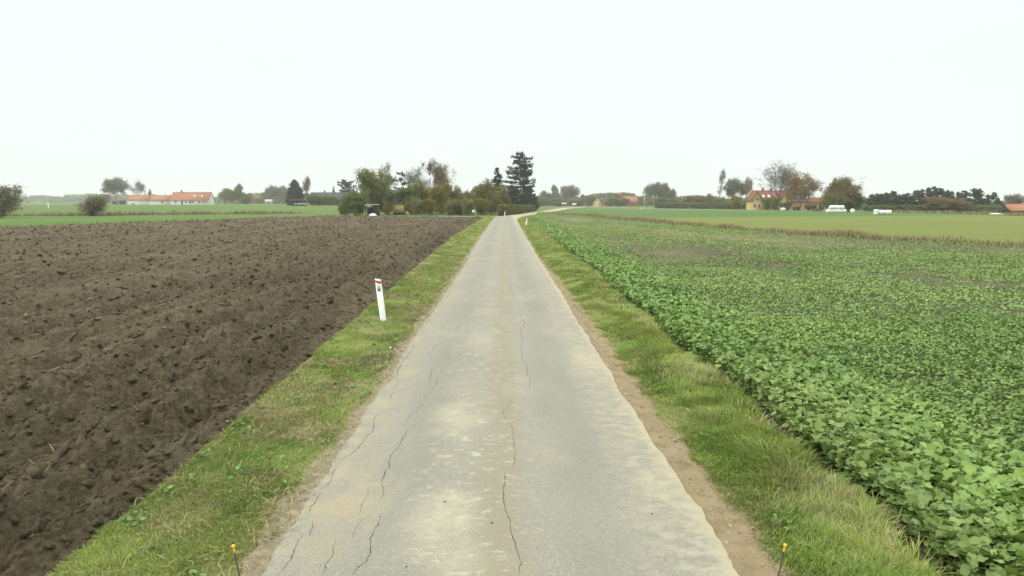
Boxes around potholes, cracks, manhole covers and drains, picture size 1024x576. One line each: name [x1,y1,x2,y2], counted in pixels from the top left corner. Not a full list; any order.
crack [390,319,451,399]
crack [502,404,522,573]
crack [352,404,422,575]
crack [277,416,376,576]
